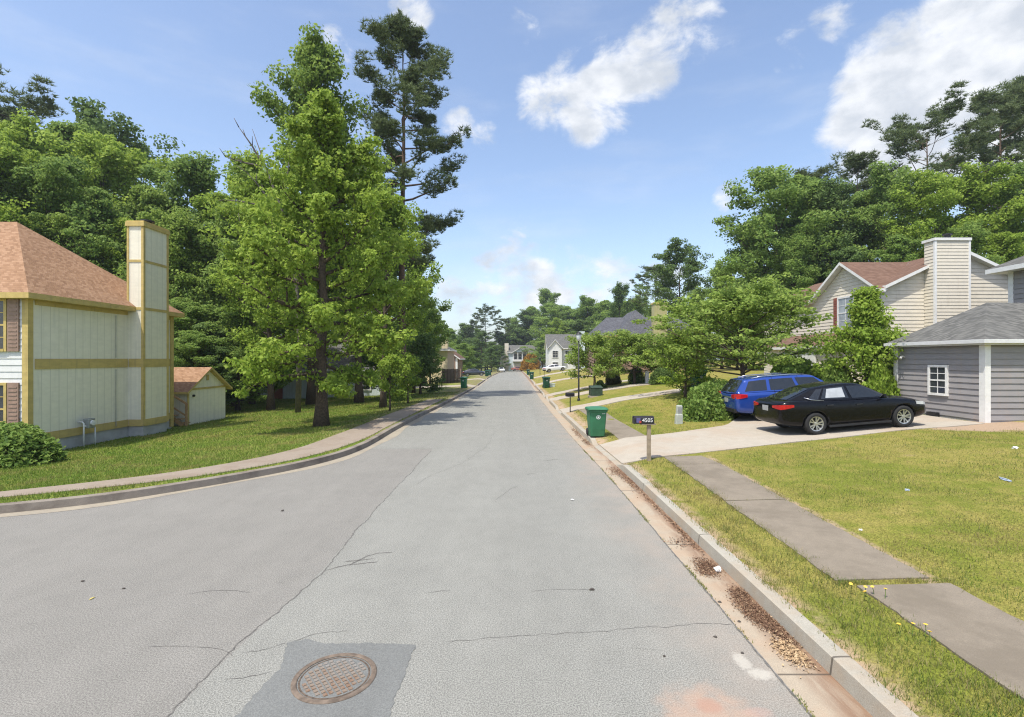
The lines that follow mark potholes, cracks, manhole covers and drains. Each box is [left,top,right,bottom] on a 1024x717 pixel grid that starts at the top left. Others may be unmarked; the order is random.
crack [328,552,390,570]
manhole cover [290,653,377,704]
crack [452,623,721,642]
